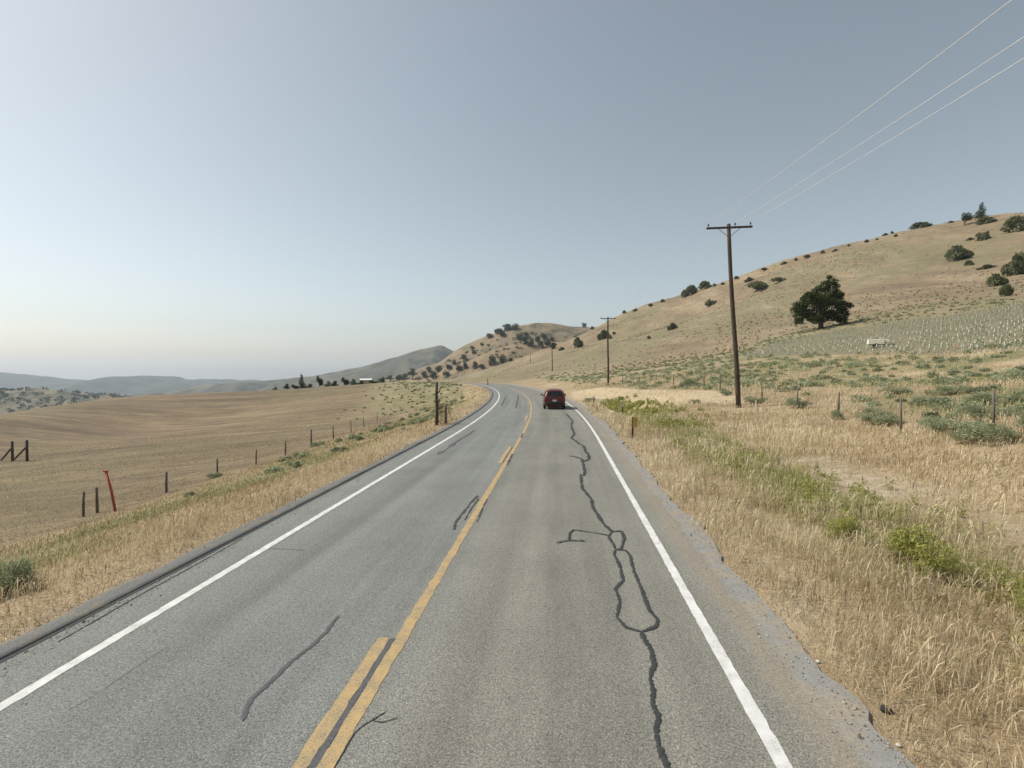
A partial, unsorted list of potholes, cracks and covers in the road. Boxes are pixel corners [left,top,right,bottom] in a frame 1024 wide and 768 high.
crack [334,711,398,767]
